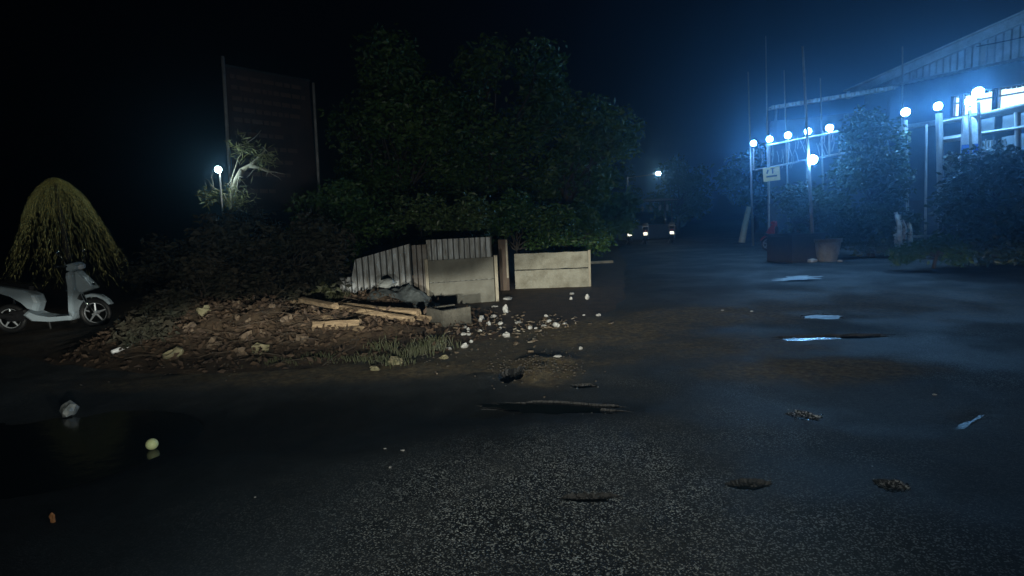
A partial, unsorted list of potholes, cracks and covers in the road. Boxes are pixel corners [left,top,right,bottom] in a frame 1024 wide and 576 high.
pothole [495,365,526,386]
pothole [785,409,824,421]
pothole [718,478,772,491]
pothole [872,478,911,493]
pothole [475,400,632,415]
pothole [759,333,906,341]
pothole [552,490,624,503]
